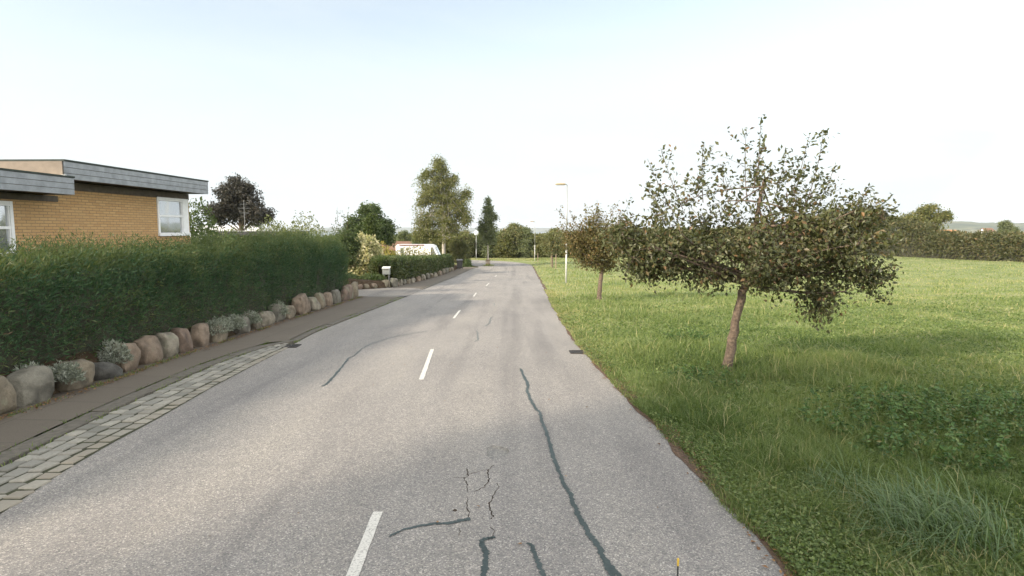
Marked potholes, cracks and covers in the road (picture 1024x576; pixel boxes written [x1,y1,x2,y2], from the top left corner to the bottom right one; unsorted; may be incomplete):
crack [454,465,499,536]
